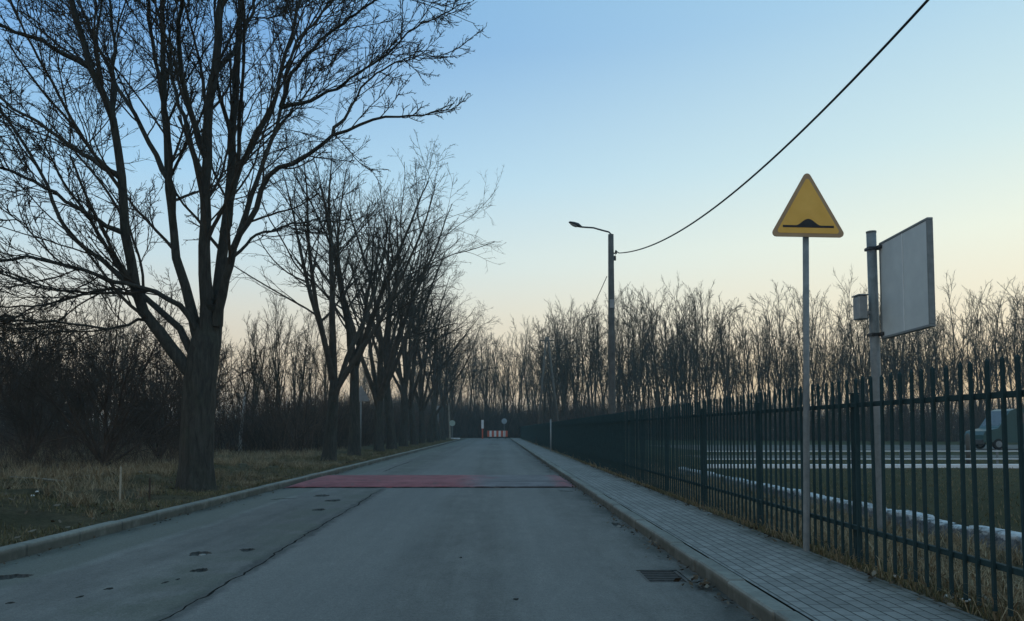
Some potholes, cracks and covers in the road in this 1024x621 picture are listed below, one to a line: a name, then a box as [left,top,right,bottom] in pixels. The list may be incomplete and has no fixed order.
drain grate [637,570,689,582]
crack [159,491,379,621]
